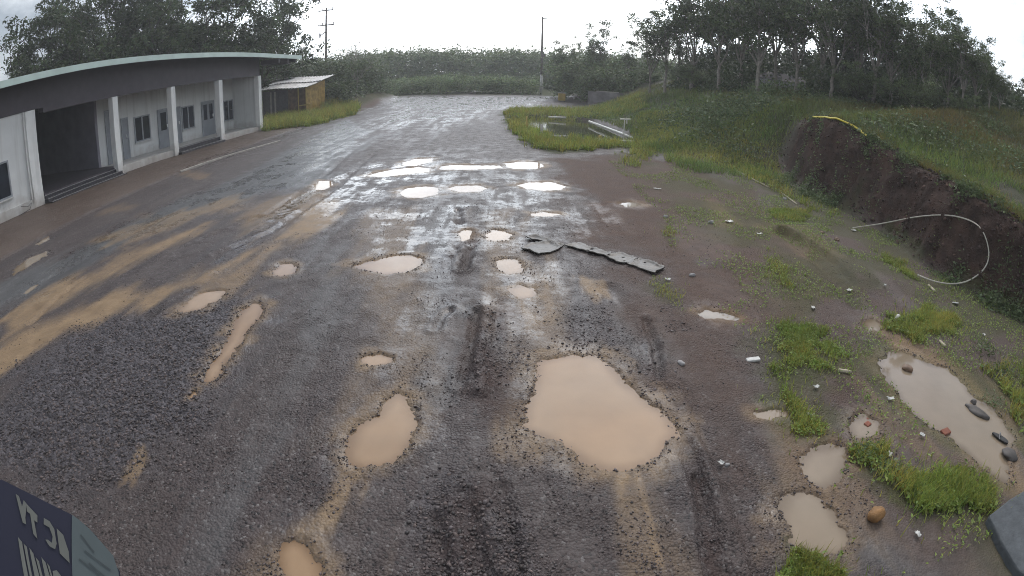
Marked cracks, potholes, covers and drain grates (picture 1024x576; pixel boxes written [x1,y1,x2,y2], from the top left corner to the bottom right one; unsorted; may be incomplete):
pothole [331,386,432,477]
pothole [439,183,493,193]
pothole [349,347,402,372]
pothole [498,281,546,301]
pothole [265,528,339,576]
pothole [479,227,520,243]
pothole [484,254,533,276]
pothole [392,184,445,199]
pothole [510,180,573,192]
pothole [451,226,479,244]
pothole [193,295,272,386]
pothole [341,251,433,277]
